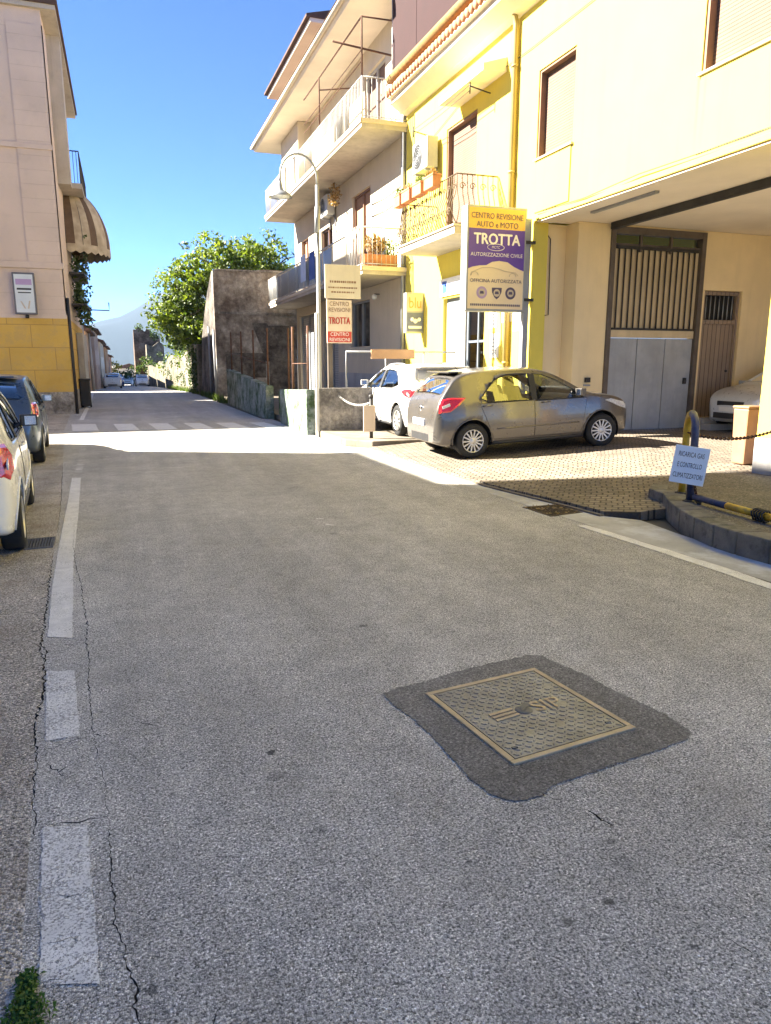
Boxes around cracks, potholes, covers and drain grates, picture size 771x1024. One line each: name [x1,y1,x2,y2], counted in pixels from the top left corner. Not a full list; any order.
crack [31,466,141,1024]
manhole cover [425,668,636,765]
drain grate [24,536,56,550]
drain grate [522,503,583,517]
